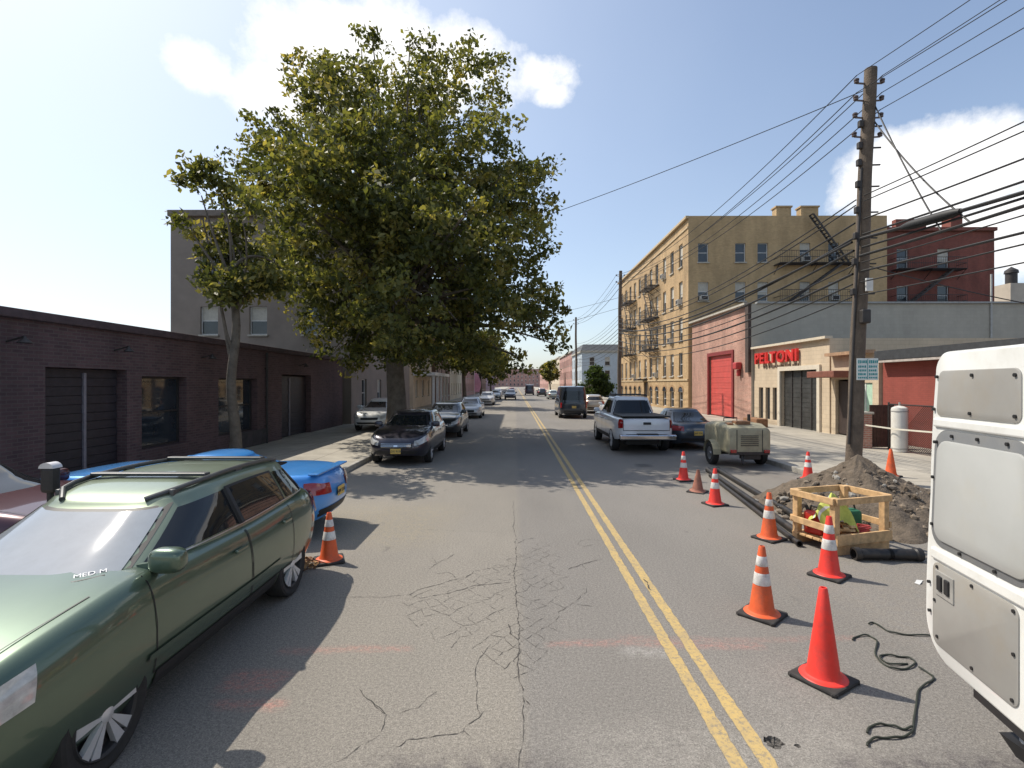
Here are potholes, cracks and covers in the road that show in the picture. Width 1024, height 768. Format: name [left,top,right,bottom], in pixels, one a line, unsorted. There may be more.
crack [325,543,588,767]
pothole [763,736,785,749]
